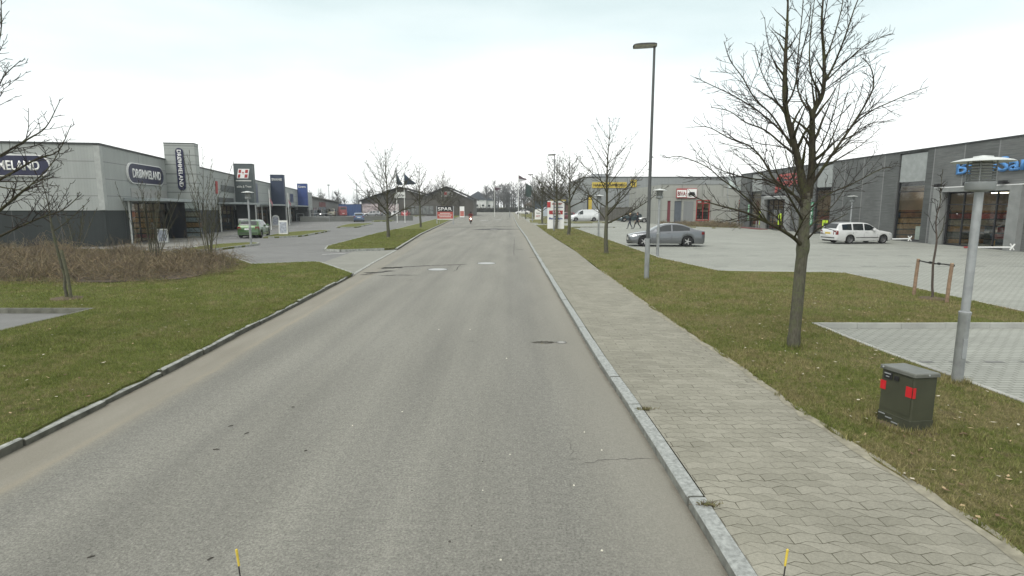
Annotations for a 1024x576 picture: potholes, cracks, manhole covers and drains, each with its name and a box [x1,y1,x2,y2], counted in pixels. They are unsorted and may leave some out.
crack [566,444,656,465]
